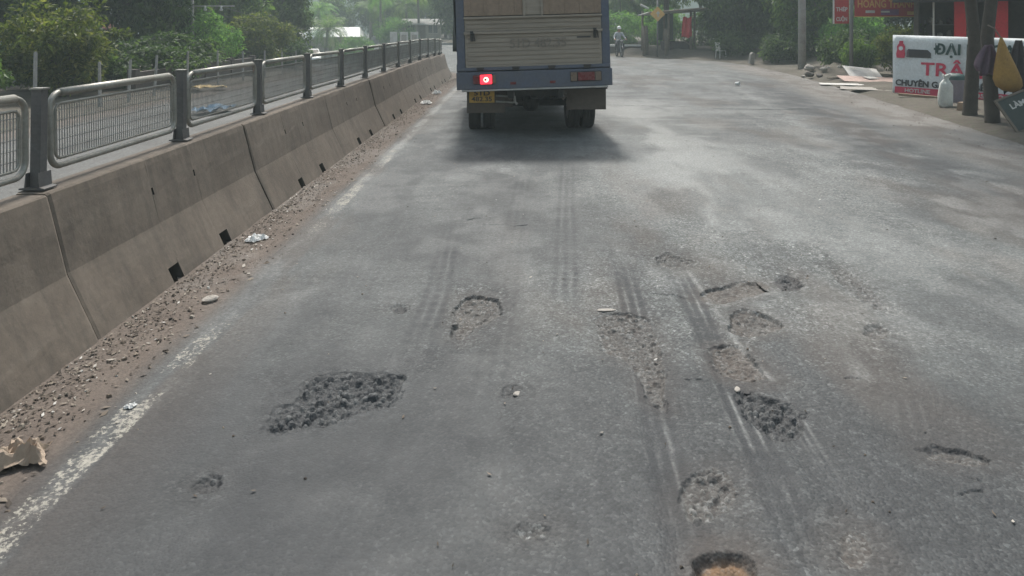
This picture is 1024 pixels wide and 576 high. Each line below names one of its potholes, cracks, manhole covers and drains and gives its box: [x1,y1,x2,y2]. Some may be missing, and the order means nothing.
pothole [725,385,827,450]
pothole [686,276,787,309]
pothole [693,339,787,394]
pothole [580,306,687,419]
pothole [244,364,421,442]
pothole [170,463,235,504]
pothole [675,536,776,576]
pothole [658,452,756,538]
pothole [439,290,515,348]
